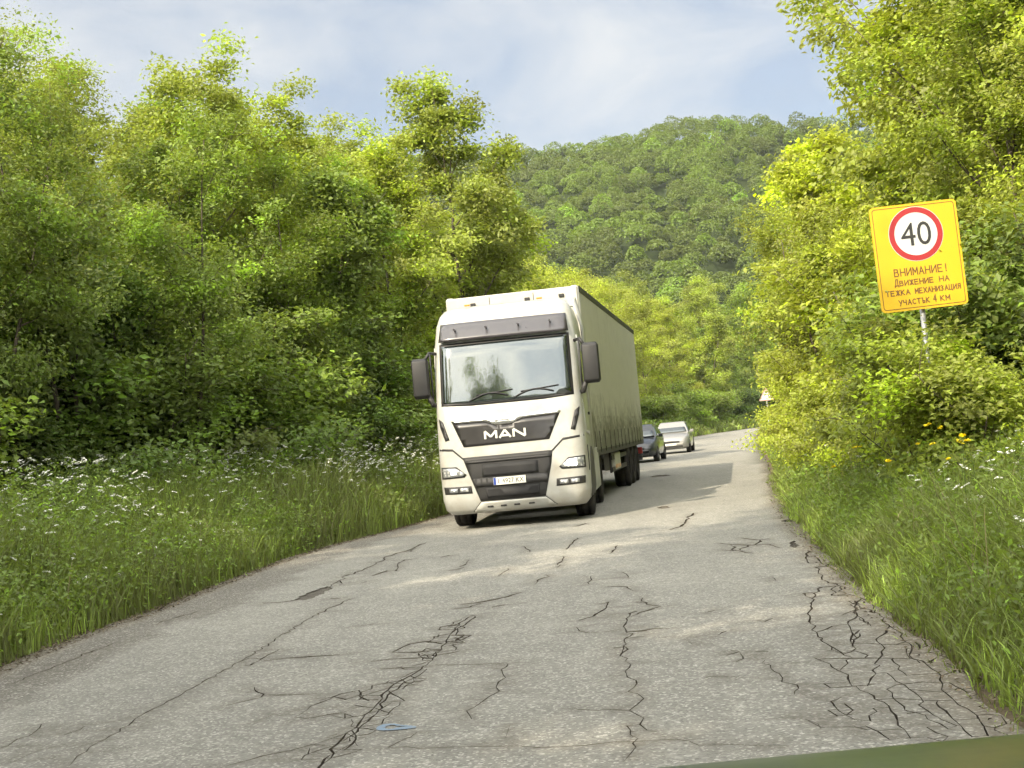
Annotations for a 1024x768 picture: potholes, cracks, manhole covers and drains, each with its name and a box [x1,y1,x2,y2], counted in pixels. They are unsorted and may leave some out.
pothole [292,585,332,601]
crack [226,574,781,768]
crack [802,551,1008,741]
